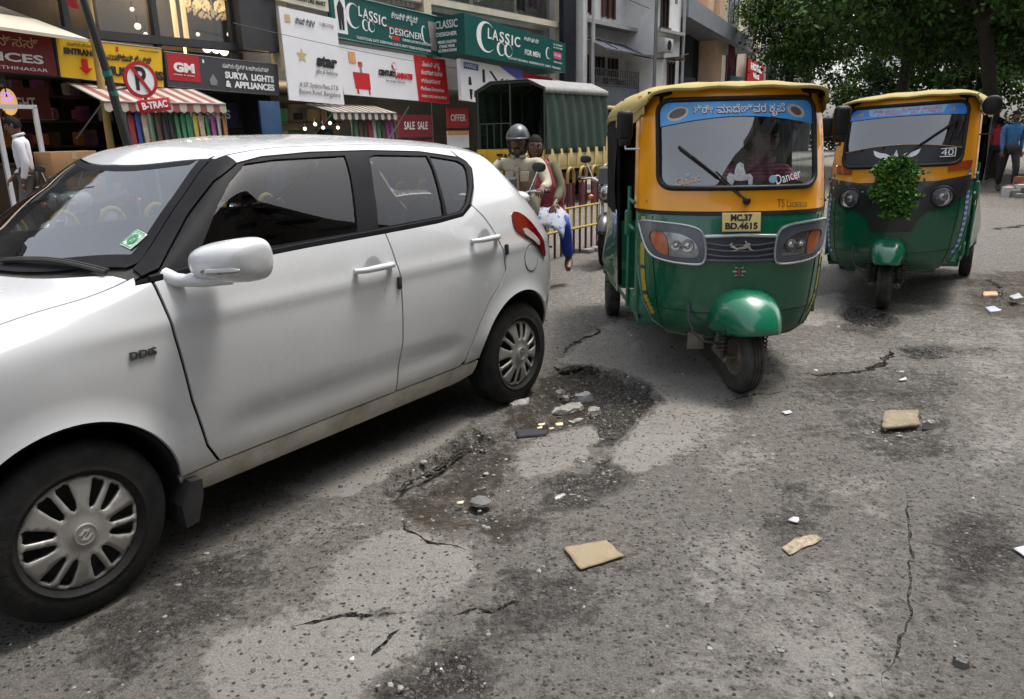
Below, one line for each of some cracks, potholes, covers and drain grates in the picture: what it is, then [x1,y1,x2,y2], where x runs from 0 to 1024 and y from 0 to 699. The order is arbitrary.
crack [553,326,601,376]
crack [728,348,895,401]
pothole [514,365,664,448]
crack [402,521,468,551]
crack [295,612,406,656]
pothole [379,427,535,537]
pothole [838,308,901,329]
